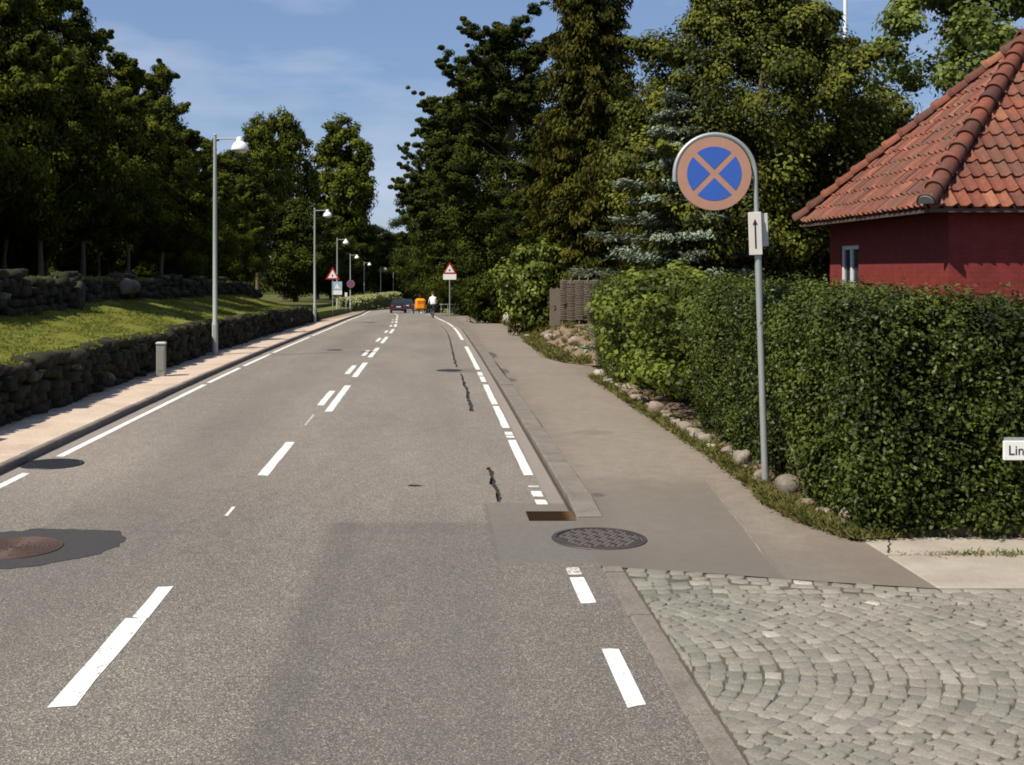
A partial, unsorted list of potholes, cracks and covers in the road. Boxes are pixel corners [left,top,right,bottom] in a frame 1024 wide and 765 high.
manhole cover [551,527,647,550]
crack [442,326,474,411]
crack [486,467,502,502]
manhole cover [0,536,64,559]
